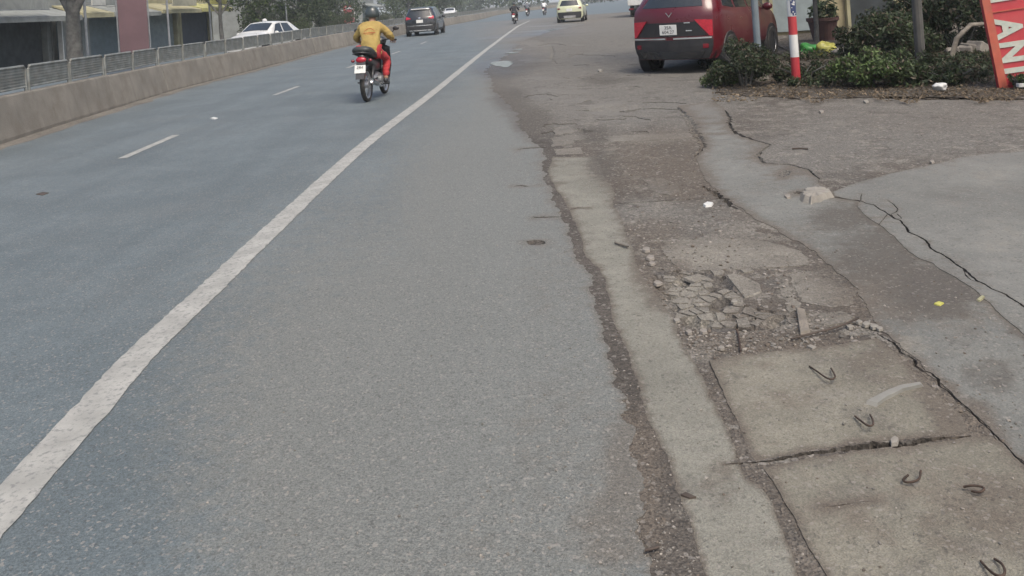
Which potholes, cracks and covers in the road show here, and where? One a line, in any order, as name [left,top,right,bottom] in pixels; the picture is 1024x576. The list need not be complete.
crack [723,333,1024,465]
crack [616,186,738,209]
crack [677,107,820,179]
crack [835,194,1024,307]
